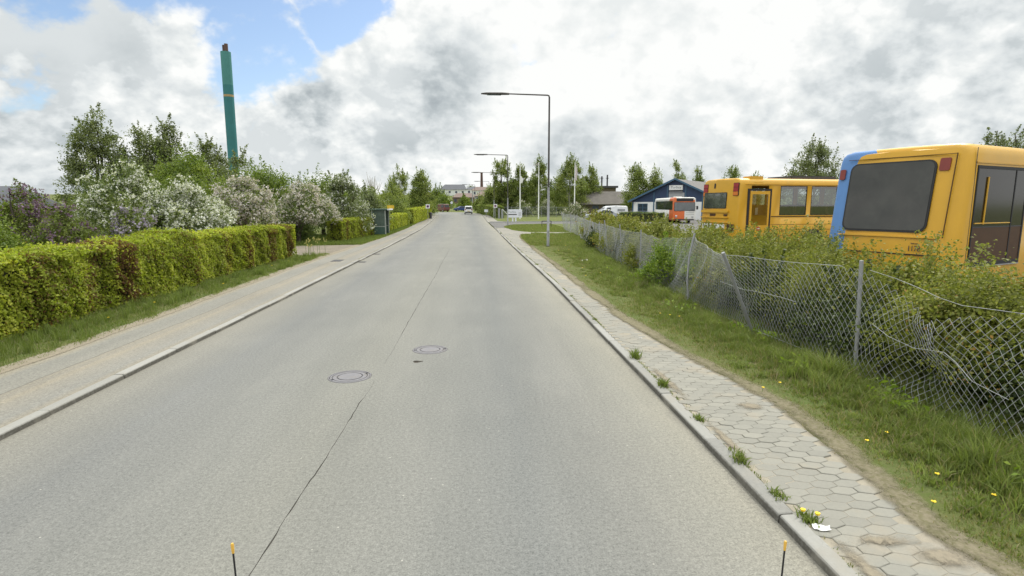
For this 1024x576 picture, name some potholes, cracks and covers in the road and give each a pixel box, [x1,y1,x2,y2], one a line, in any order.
manhole cover [412,345,447,354]
manhole cover [328,370,372,383]
crack [249,395,366,576]
